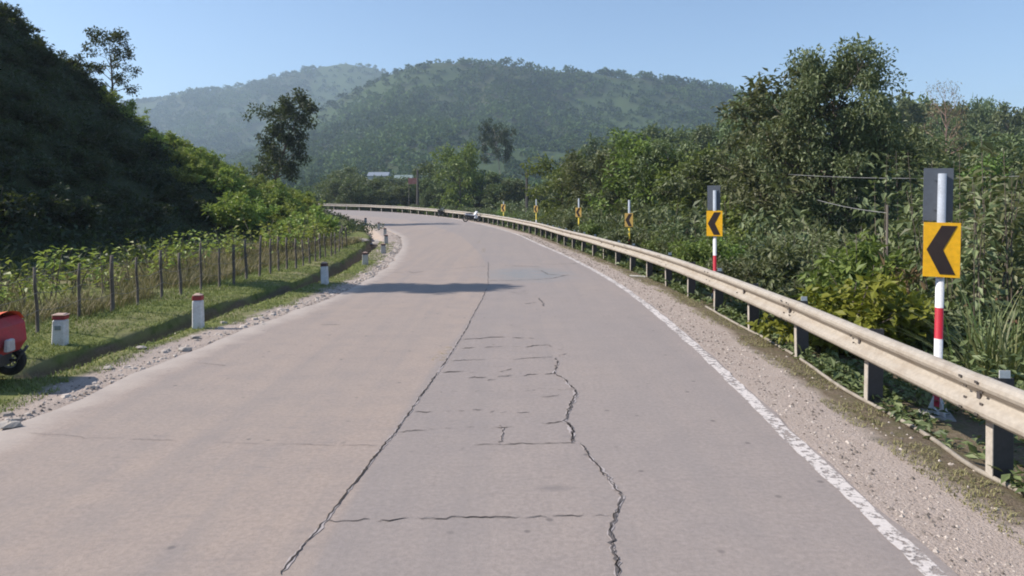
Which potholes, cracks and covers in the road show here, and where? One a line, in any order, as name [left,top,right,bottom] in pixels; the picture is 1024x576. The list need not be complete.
crack [328,337,625,576]
